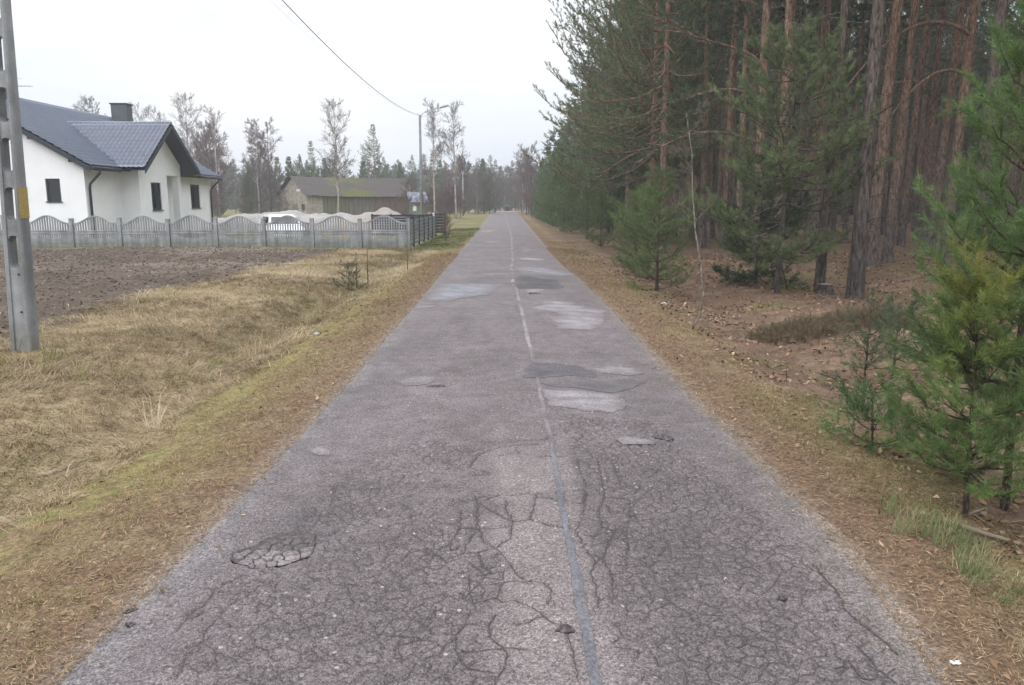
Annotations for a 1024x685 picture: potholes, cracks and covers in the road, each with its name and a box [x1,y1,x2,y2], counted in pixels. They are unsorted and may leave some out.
pothole [231,531,316,571]
crack [175,441,586,685]
crack [557,413,899,685]
crack [457,434,562,479]
